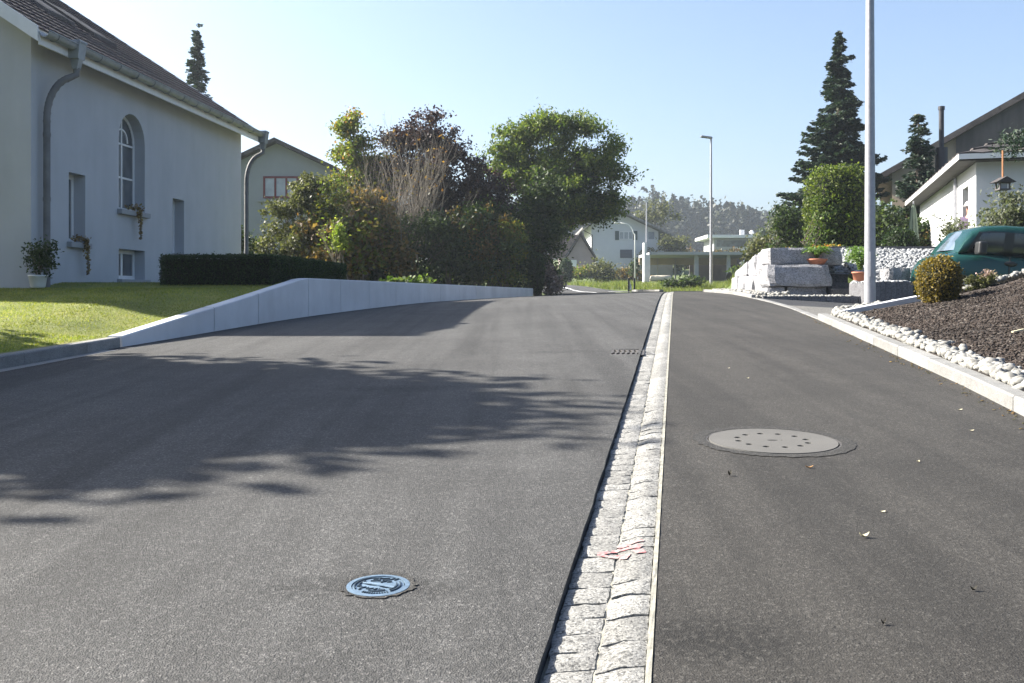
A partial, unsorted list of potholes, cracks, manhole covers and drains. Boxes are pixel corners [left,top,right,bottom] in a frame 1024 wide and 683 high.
drain grate [610,350,655,358]
manhole cover [692,426,857,457]
utility cover [339,572,418,598]
